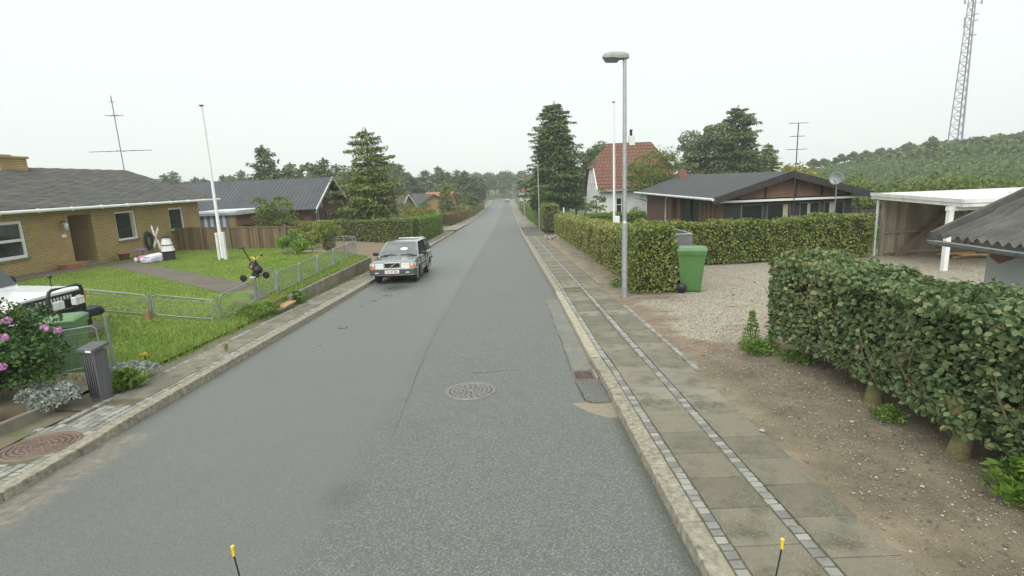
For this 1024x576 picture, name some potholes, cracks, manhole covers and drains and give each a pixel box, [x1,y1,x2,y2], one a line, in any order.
manhole cover [0,431,83,462]
drain grate [572,369,599,381]
manhole cover [445,382,496,400]
